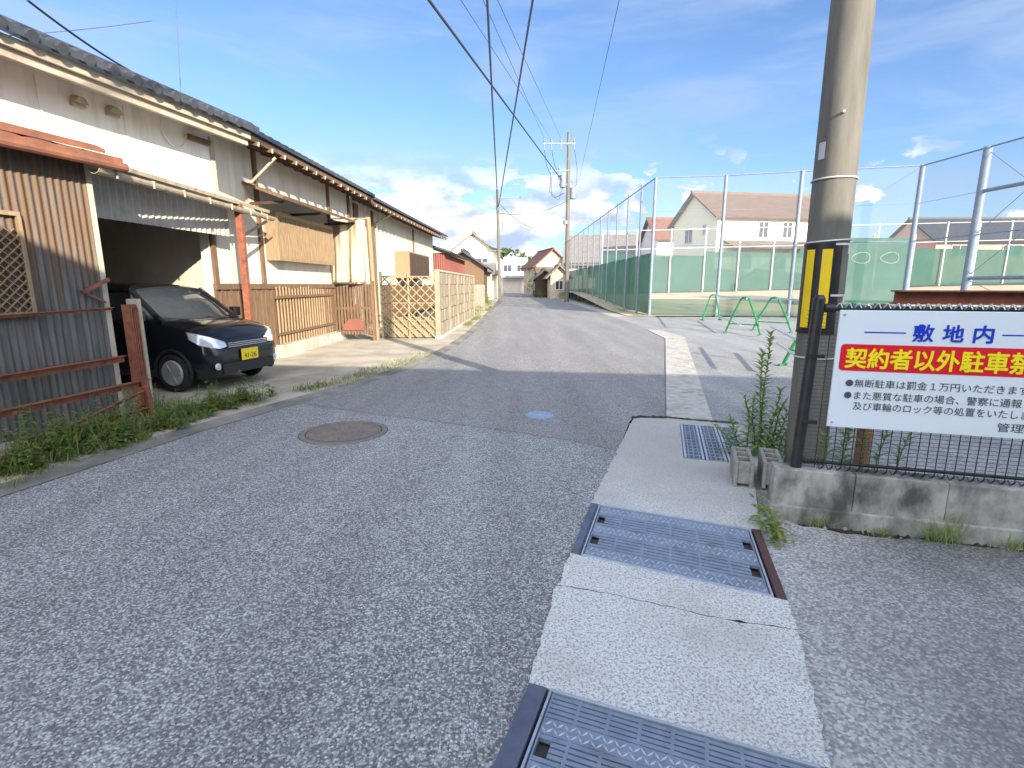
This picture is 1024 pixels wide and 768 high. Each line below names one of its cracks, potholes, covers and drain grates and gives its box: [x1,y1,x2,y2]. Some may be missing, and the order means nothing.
crack [557,585,797,630]
drain grate [571,503,787,600]
drain grate [680,424,742,462]
drain grate [492,683,828,768]
manhole cover [298,421,388,445]
